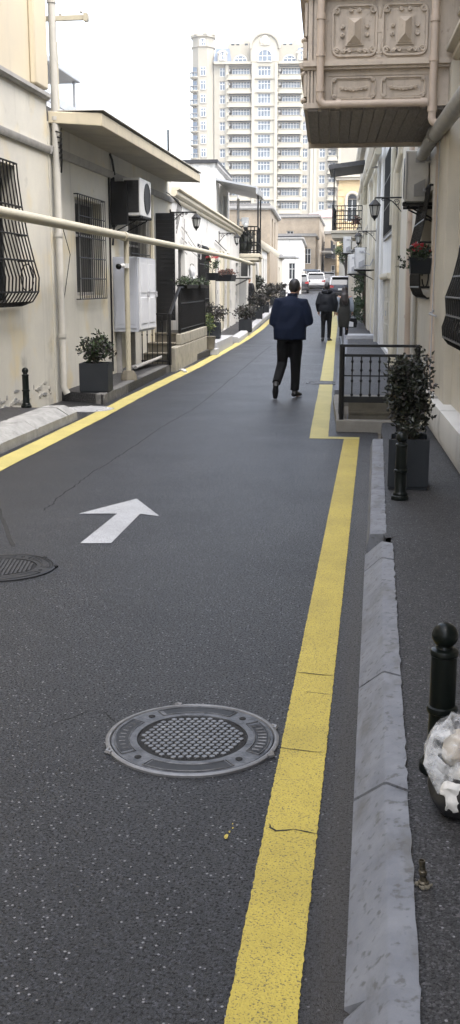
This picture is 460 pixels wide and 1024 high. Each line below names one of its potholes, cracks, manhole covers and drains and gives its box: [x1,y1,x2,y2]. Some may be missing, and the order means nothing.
manhole cover [0,554,58,582]
manhole cover [104,702,279,778]
crack [269,825,317,834]
